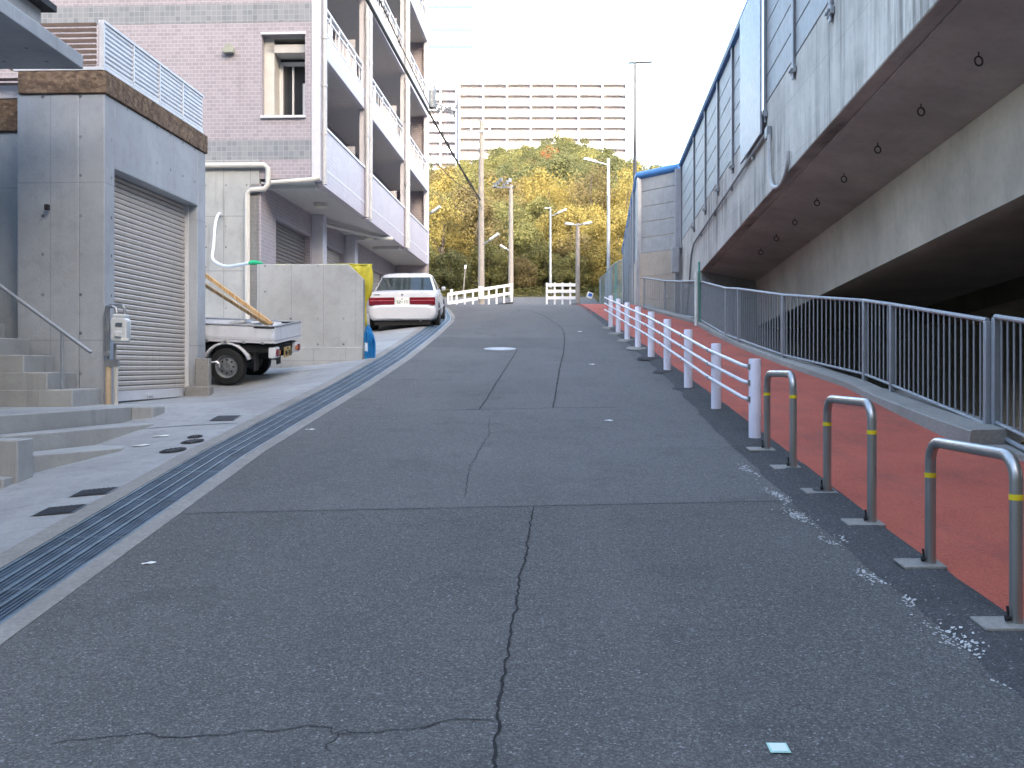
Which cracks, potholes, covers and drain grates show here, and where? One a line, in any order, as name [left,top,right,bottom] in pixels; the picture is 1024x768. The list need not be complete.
drain grate [0,309,451,624]
crack [51,506,534,768]
crack [464,418,490,496]
